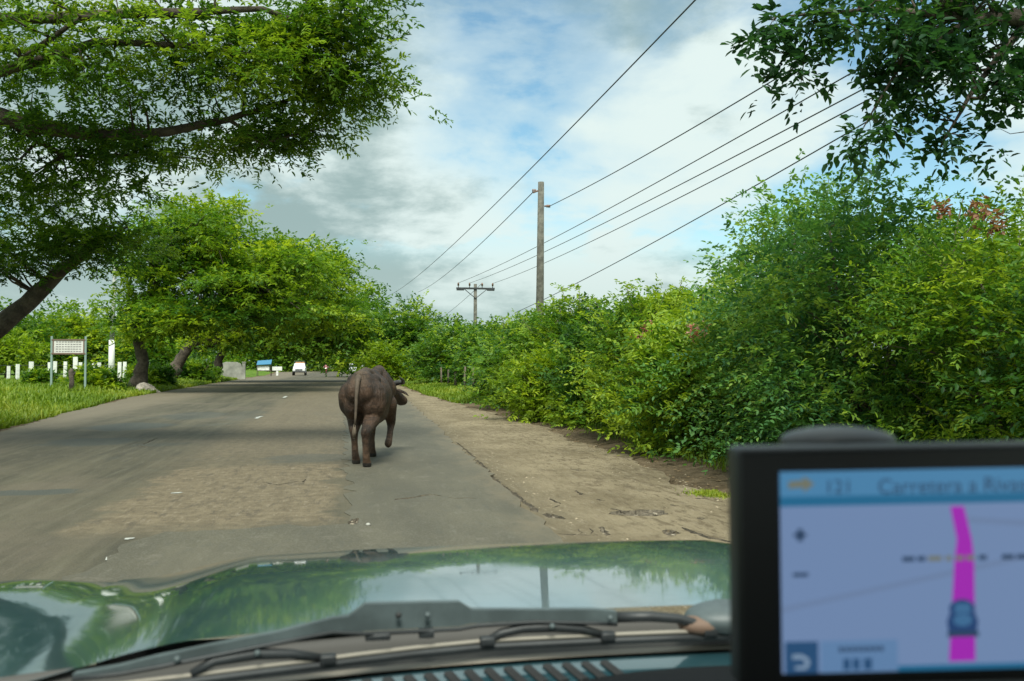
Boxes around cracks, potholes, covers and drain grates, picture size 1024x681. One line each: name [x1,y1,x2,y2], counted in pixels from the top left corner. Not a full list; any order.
crack [395,442,561,512]
